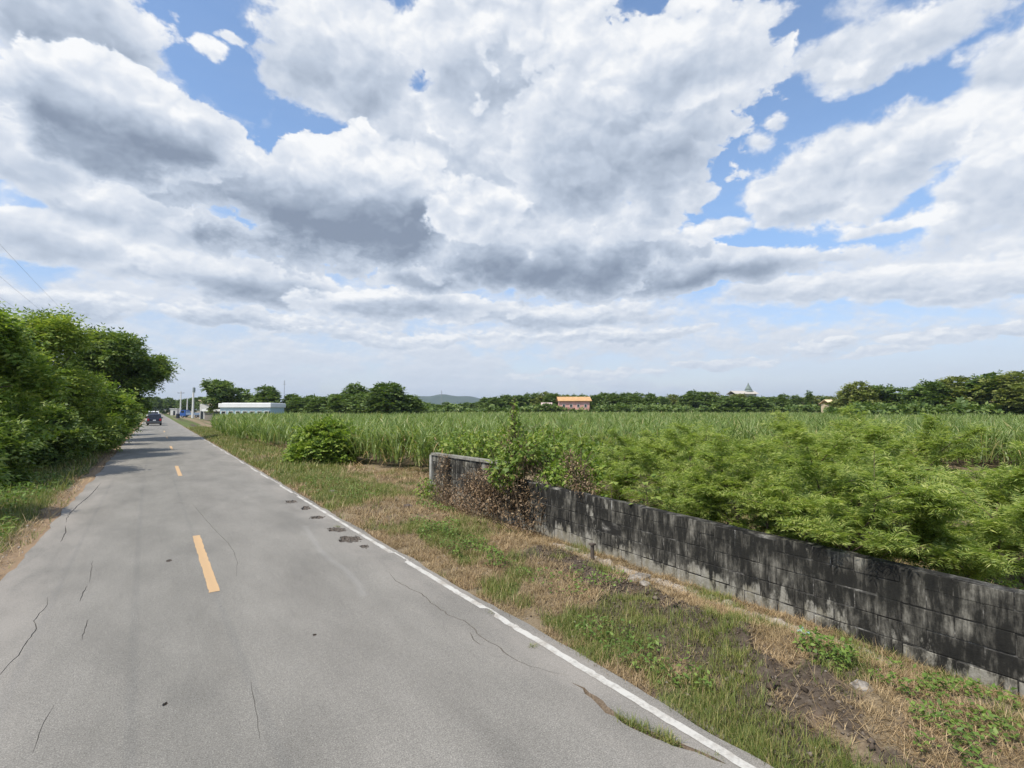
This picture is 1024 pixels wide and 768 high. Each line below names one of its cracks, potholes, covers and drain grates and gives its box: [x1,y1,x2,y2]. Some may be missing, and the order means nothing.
crack [391,575,726,764]
crack [1,600,48,673]
pothole [339,535,362,543]
